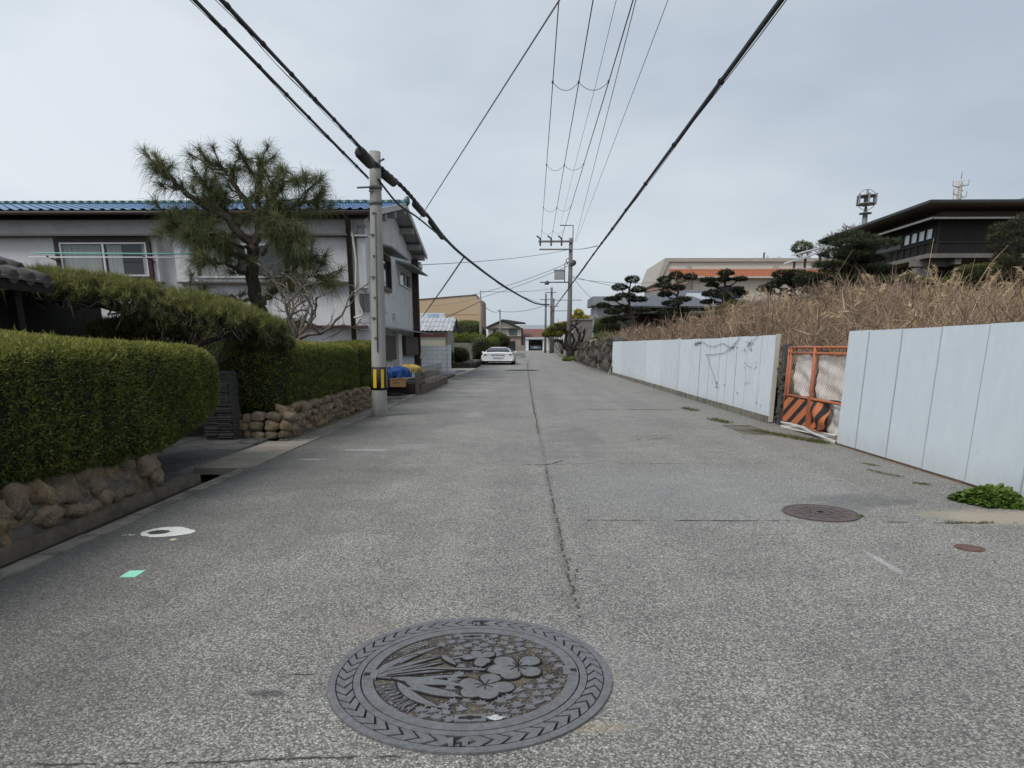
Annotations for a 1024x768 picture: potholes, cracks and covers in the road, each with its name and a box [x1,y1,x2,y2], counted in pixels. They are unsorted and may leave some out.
manhole cover [327,618,612,756]
utility cover [954,544,985,552]
manhole cover [782,504,861,522]
